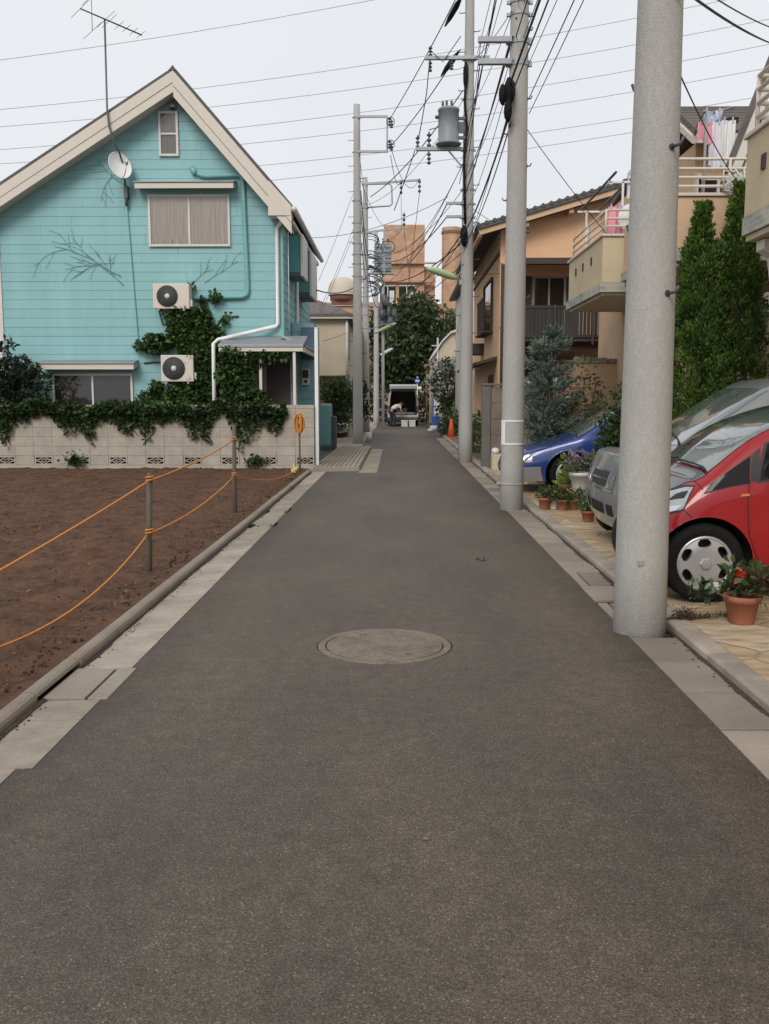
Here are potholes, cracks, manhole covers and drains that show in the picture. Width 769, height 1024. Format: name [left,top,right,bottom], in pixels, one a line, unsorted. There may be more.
manhole cover [317,628,452,665]
